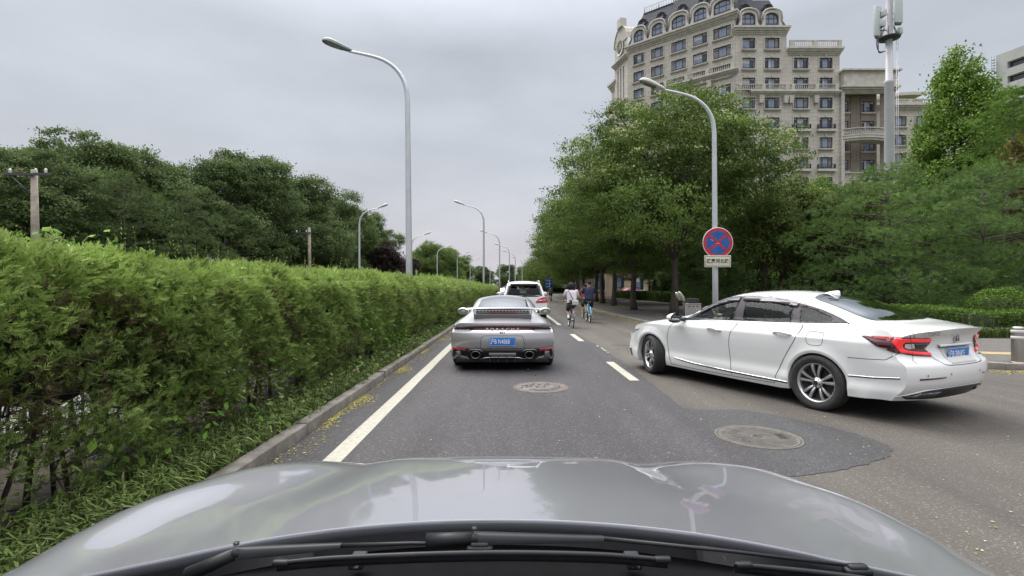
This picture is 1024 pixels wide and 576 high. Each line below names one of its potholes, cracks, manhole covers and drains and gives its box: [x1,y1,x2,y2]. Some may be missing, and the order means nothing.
manhole cover [513,382,569,393]
manhole cover [714,425,805,450]
